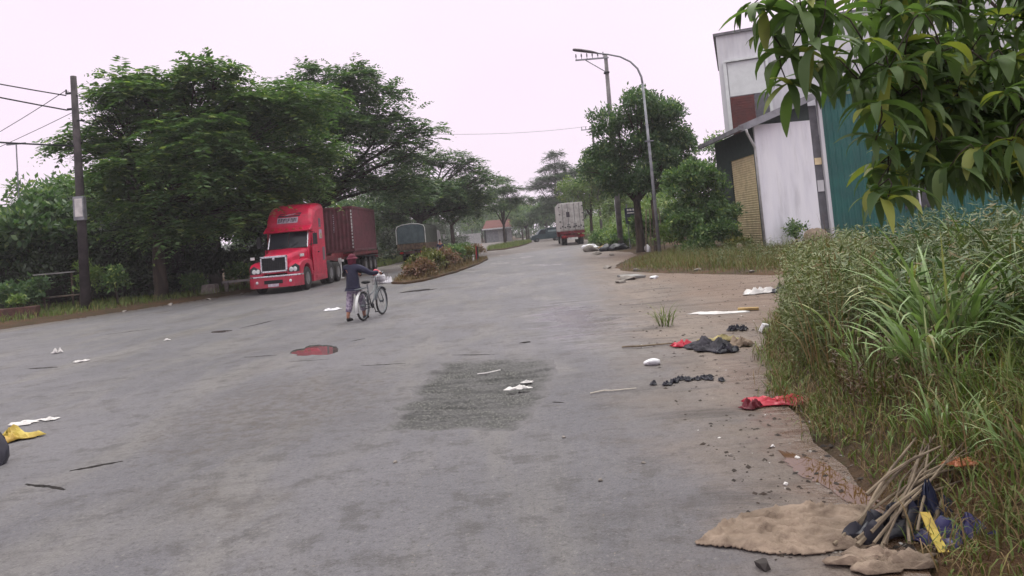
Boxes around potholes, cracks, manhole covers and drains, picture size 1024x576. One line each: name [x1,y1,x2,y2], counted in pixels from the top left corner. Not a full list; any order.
pothole [290,345,338,356]
crack [25,461,123,490]
